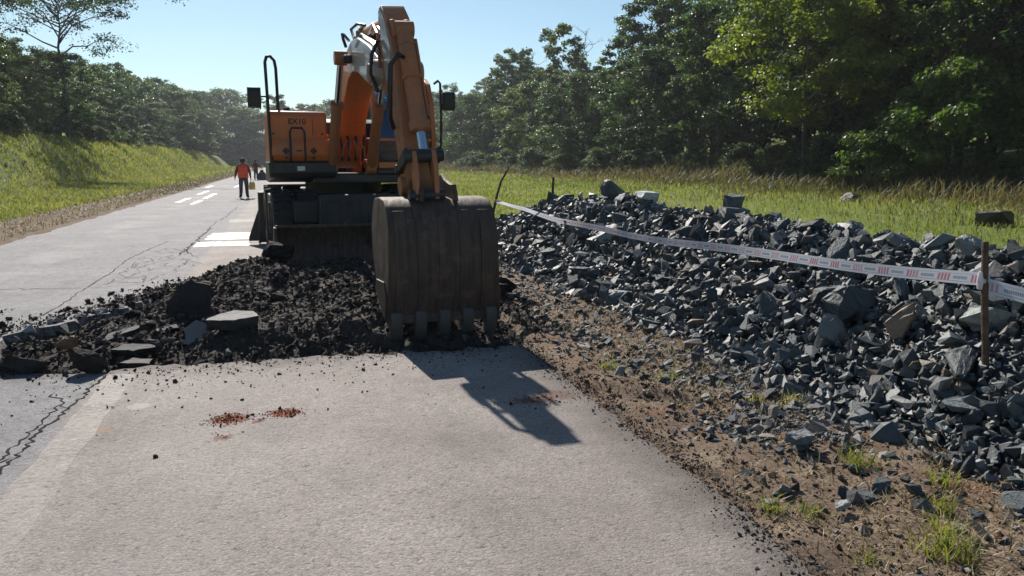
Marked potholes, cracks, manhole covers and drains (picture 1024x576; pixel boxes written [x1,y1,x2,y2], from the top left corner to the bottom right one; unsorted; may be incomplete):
crack [18,184,238,327]
crack [0,375,106,474]
